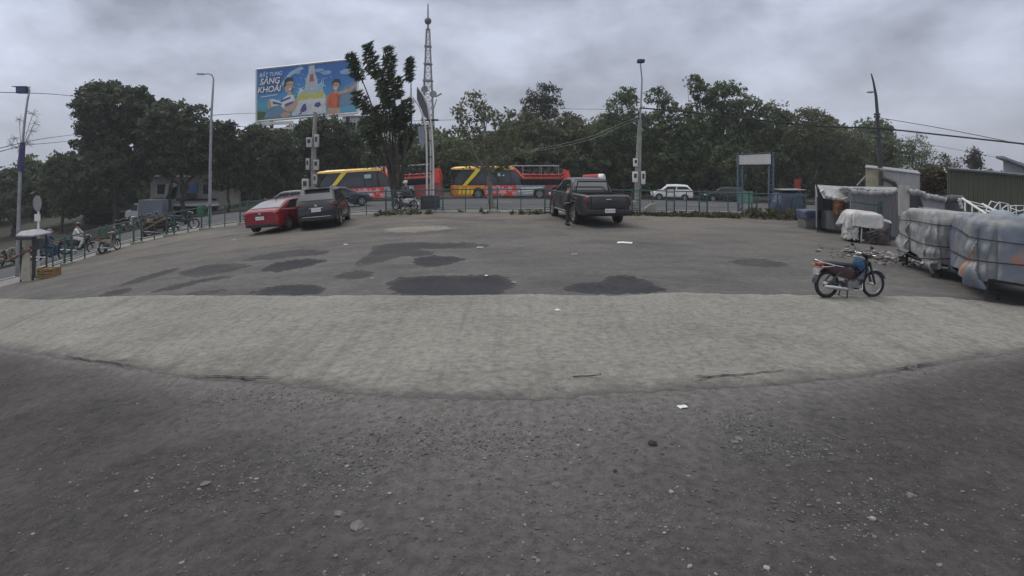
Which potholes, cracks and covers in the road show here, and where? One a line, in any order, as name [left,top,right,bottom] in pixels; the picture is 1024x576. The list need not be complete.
crack [61,355,138,367]
crack [693,369,783,382]
